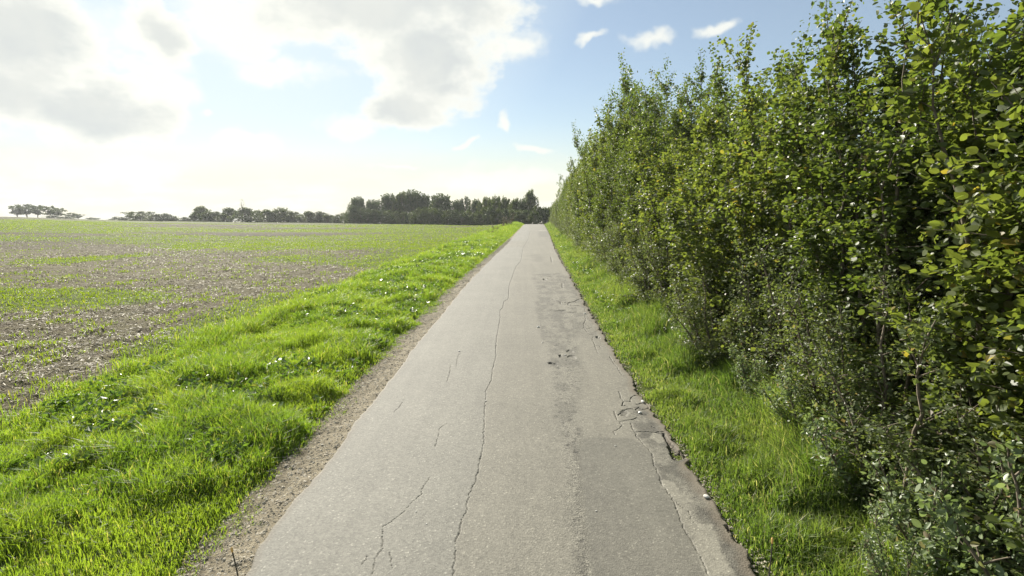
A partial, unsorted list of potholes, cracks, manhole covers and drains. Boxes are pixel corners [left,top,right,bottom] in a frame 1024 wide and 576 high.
crack [355,231,715,576]
